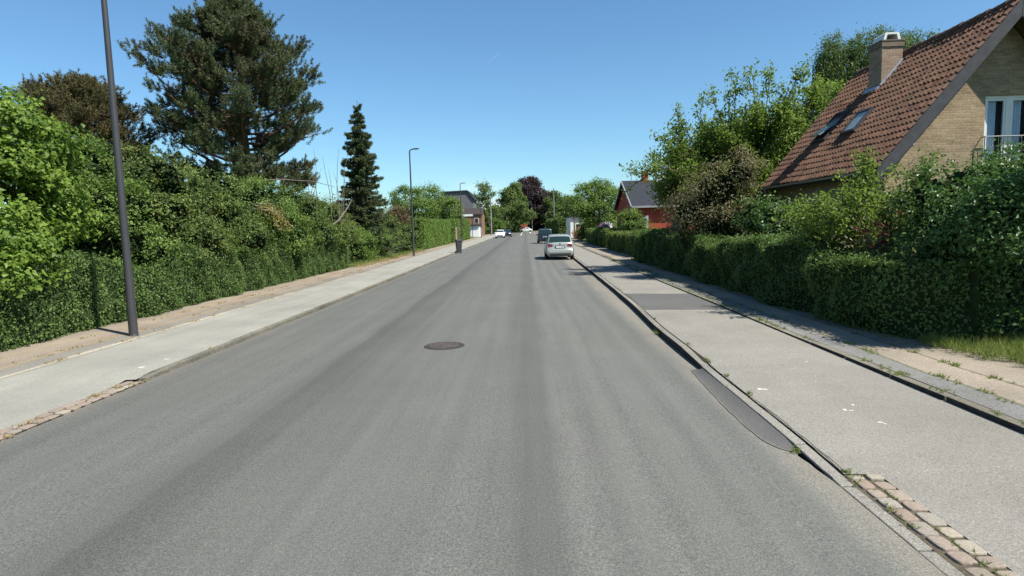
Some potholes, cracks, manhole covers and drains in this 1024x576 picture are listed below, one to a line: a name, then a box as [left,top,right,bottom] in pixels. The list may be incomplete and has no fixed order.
manhole cover [424,342,465,350]
